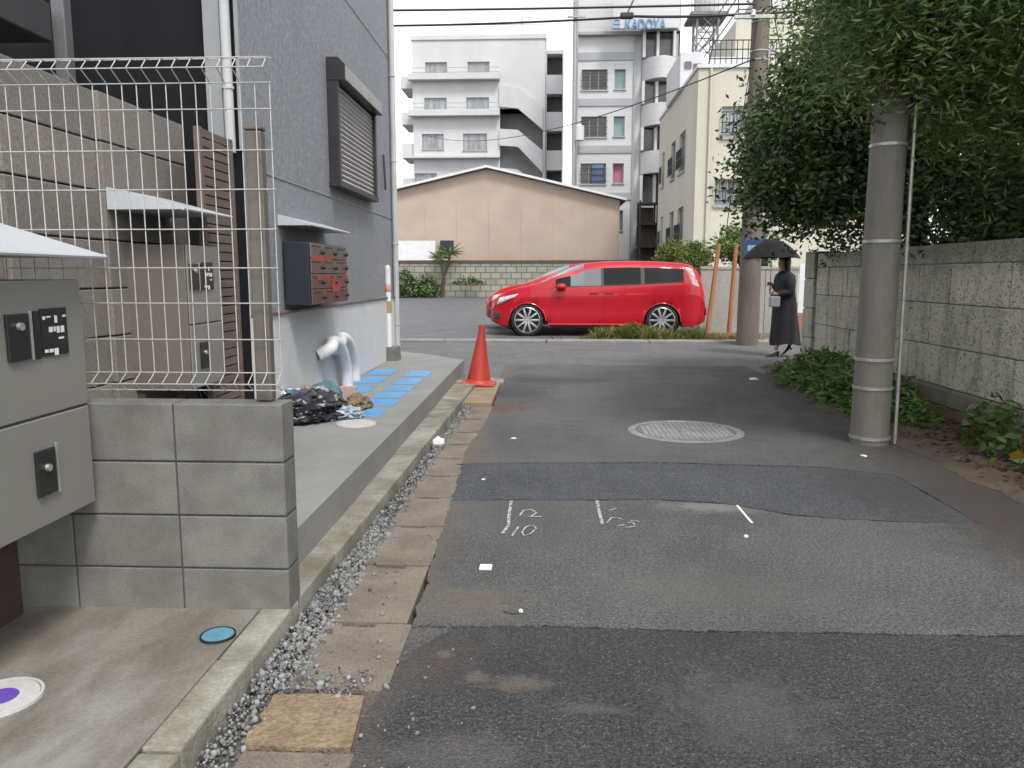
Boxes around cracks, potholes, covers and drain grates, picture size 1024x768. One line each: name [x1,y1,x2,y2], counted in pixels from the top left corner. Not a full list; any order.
manhole cover [628,420,745,443]
utility cover [336,419,377,428]
utility cover [199,626,236,645]
utility cover [0,677,45,718]
